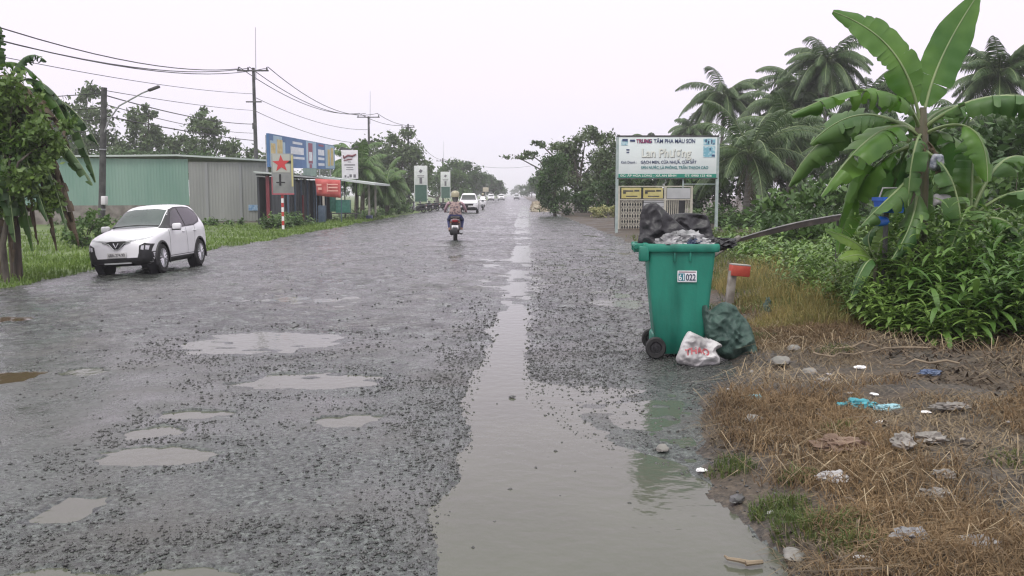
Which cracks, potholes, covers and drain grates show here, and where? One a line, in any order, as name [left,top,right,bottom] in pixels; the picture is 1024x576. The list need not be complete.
pothole [121,424,186,440]
pothole [0,370,50,384]
pothole [93,443,225,467]
pothole [222,370,396,390]
pothole [56,367,109,376]
pothole [0,314,44,322]
pothole [177,330,357,356]
pothole [311,412,386,428]
pothole [154,408,240,419]
pothole [16,495,114,526]
